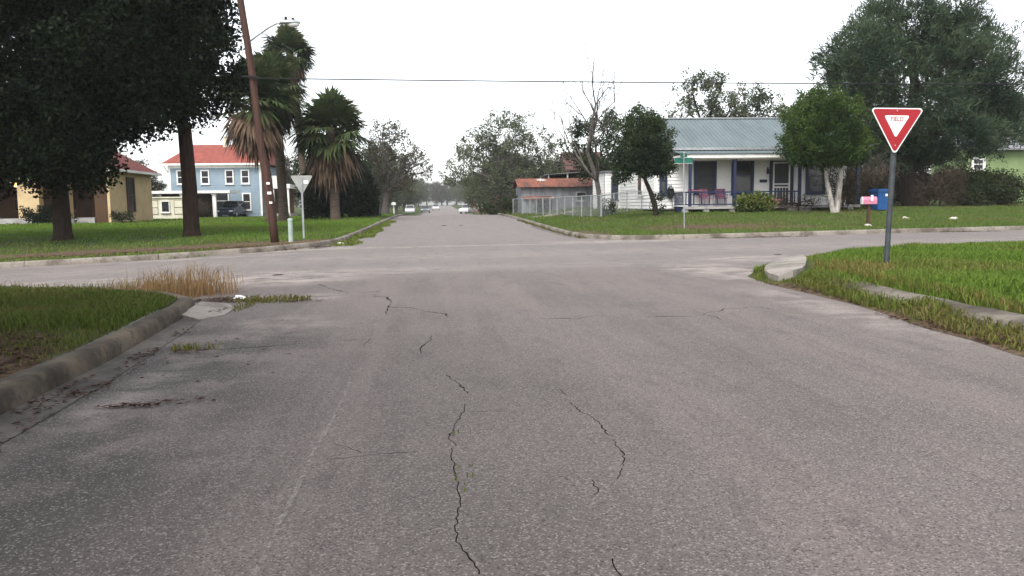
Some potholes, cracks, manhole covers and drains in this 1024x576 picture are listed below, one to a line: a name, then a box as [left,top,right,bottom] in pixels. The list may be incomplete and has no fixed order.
crack [333,444,418,459]
crack [318,284,447,316]
crack [446,375,484,574]
crack [559,389,625,479]
